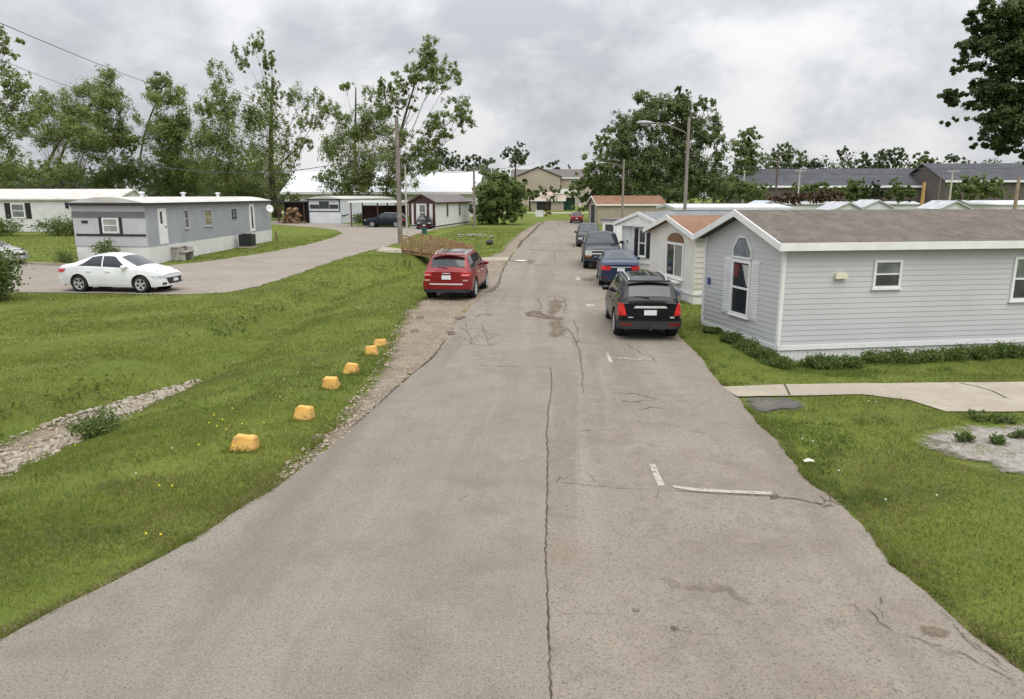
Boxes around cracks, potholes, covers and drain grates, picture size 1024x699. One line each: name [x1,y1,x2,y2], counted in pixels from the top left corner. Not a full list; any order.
crack [539,296,584,392]
crack [854,597,1014,680]
crack [544,368,847,699]
